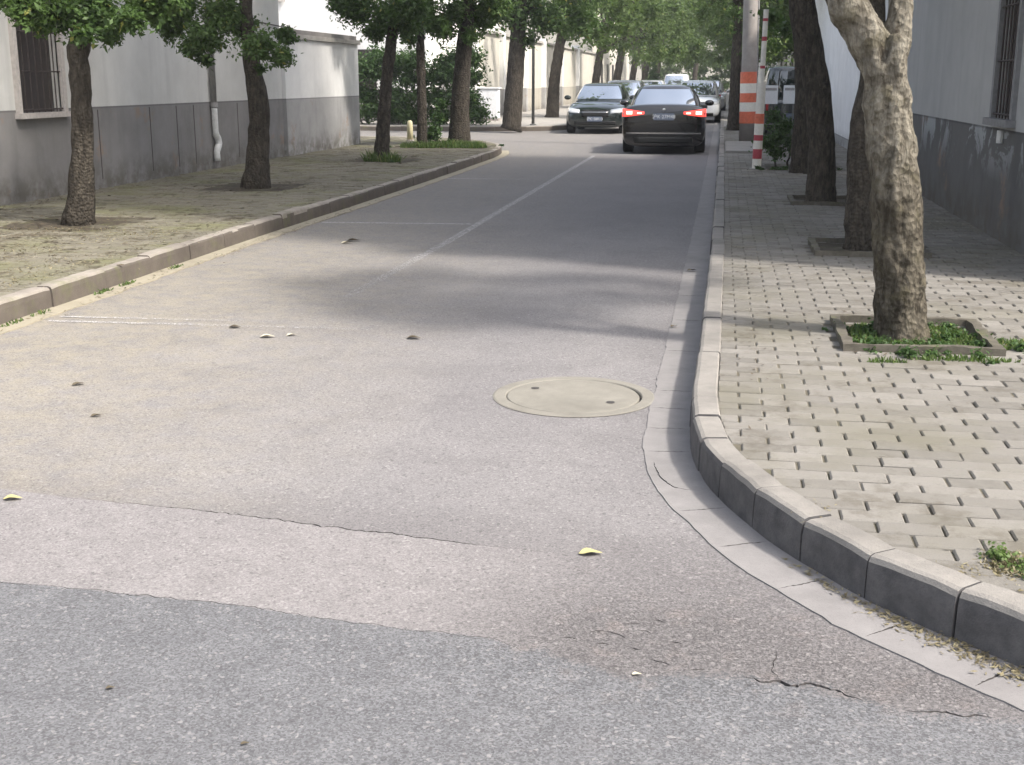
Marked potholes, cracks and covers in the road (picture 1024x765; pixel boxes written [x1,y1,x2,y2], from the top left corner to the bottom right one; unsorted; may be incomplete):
crack [740,651,863,701]
crack [903,709,995,718]
manhole cover [493,377,654,418]
crack [564,620,704,670]
